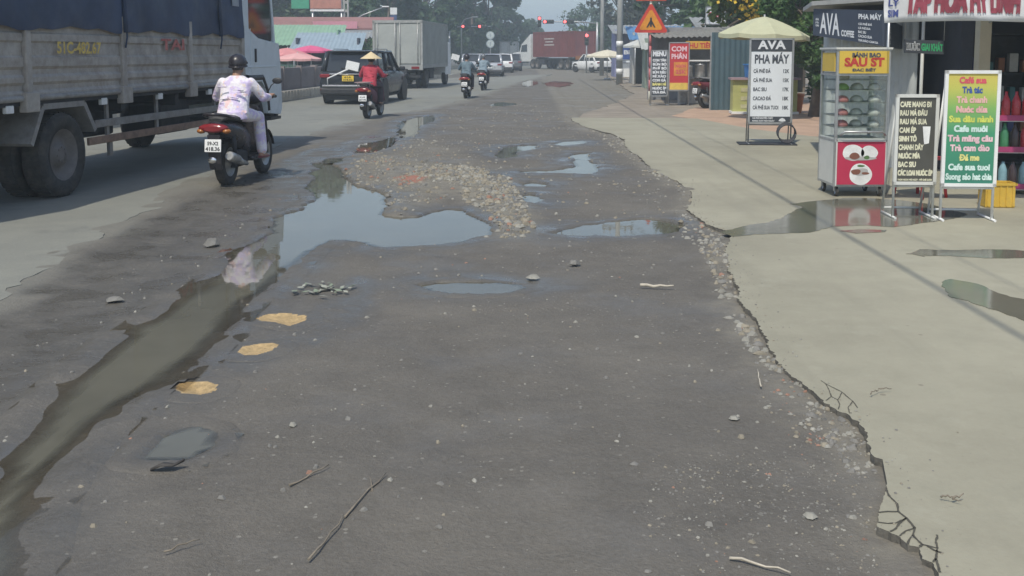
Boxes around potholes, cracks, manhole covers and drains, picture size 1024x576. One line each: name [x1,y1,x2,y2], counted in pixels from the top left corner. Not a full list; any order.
pothole [534,217,705,240]
pothole [382,114,450,139]
pothole [480,142,550,160]
pothole [399,276,547,299]
pothole [506,189,562,206]
pothole [338,136,412,155]
crack [879,487,944,572]
pothole [505,151,617,176]
crack [821,380,858,413]
